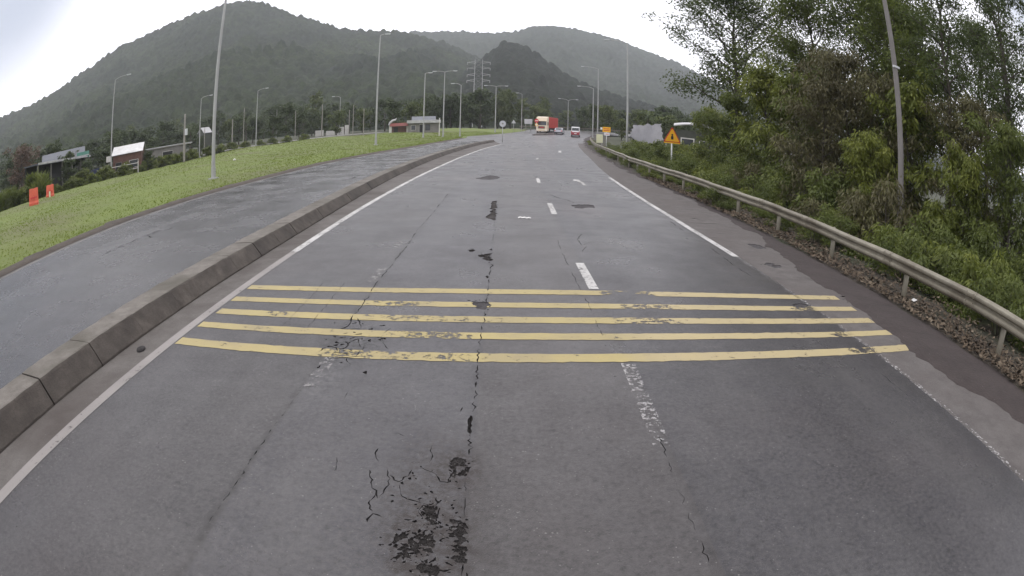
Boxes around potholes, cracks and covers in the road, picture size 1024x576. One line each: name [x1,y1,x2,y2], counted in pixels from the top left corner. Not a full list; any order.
crack [366,434,461,566]
pothole [486,201,498,221]
crack [317,316,388,368]
